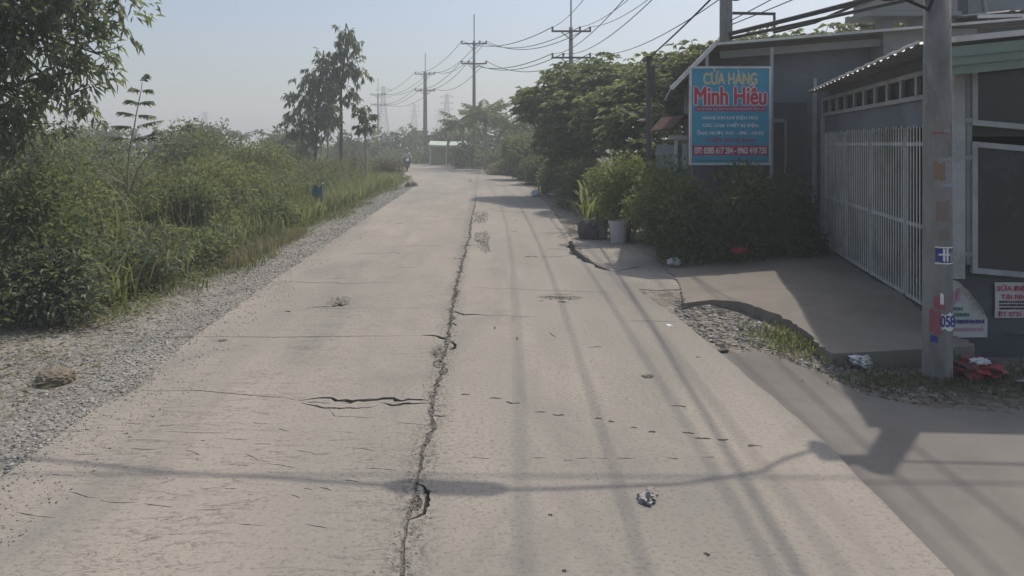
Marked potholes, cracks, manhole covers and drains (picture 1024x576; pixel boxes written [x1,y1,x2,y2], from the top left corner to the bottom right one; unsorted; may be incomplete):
pothole [472,211,490,225]
pothole [472,229,491,255]
crack [148,179,568,576]
